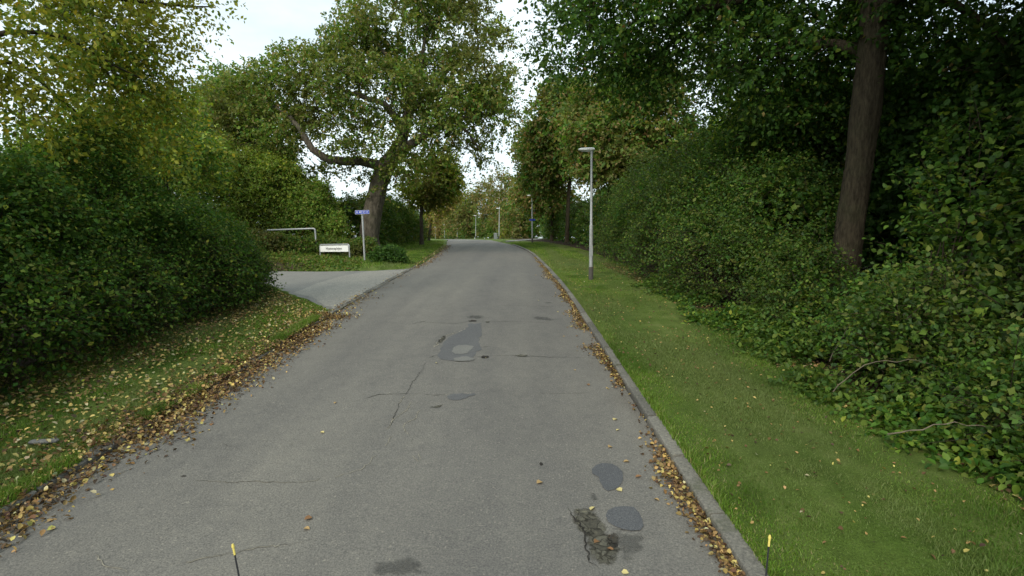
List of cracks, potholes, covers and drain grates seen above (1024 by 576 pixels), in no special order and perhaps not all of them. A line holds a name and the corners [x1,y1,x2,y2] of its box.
crack [173,538,316,564]
crack [200,321,508,483]
